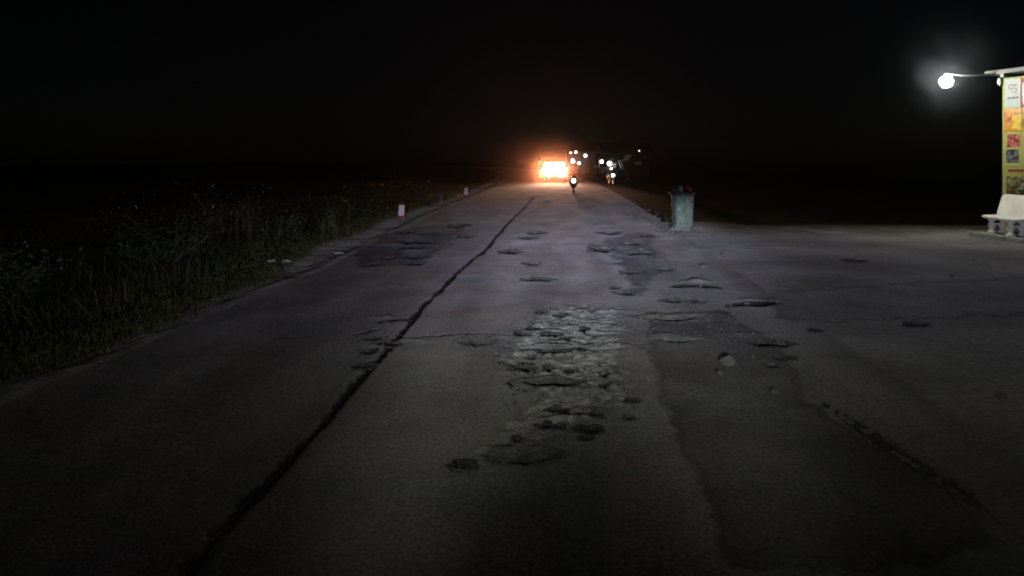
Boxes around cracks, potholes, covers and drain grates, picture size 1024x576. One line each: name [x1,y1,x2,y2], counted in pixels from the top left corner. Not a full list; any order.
pothole [480,445,569,468]
pothole [747,338,799,348]
pothole [507,375,593,389]
crack [813,397,999,523]
pothole [586,245,618,254]
crack [178,198,534,576]
pothole [444,459,480,472]
pothole [507,363,536,373]
pothole [571,424,605,435]
